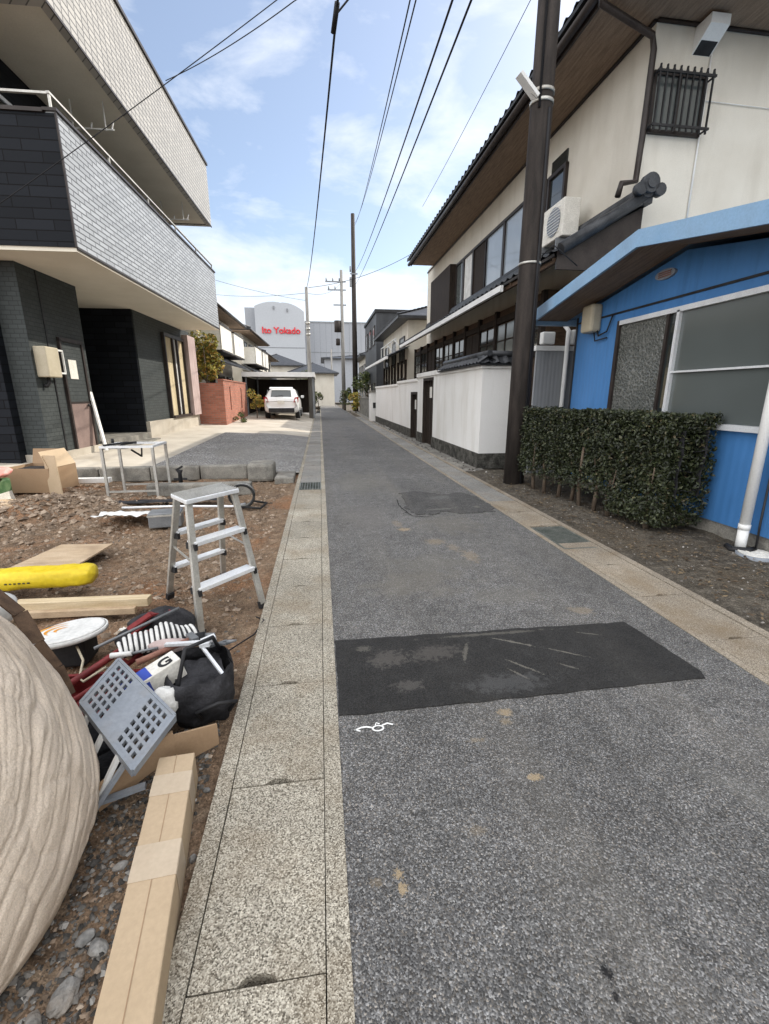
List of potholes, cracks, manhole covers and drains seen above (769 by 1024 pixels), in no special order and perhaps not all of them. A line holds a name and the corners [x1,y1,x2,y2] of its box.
drain grate [299,482,321,490]
